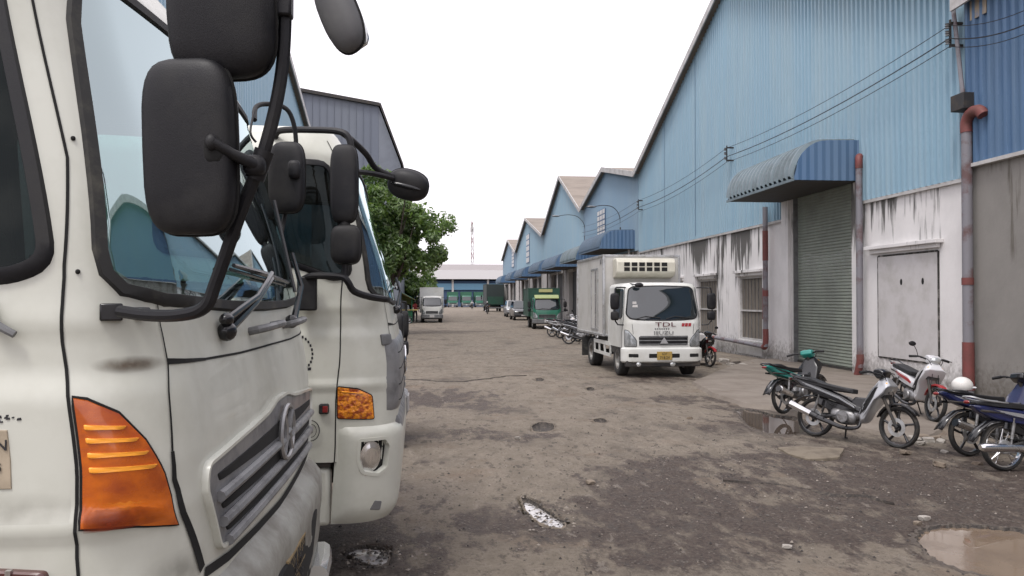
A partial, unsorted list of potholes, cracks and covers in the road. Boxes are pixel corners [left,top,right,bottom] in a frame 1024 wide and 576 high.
pothole [907,523,1024,576]
pothole [345,544,391,568]
pothole [531,422,556,433]
pothole [519,496,567,529]
pothole [731,409,816,437]
